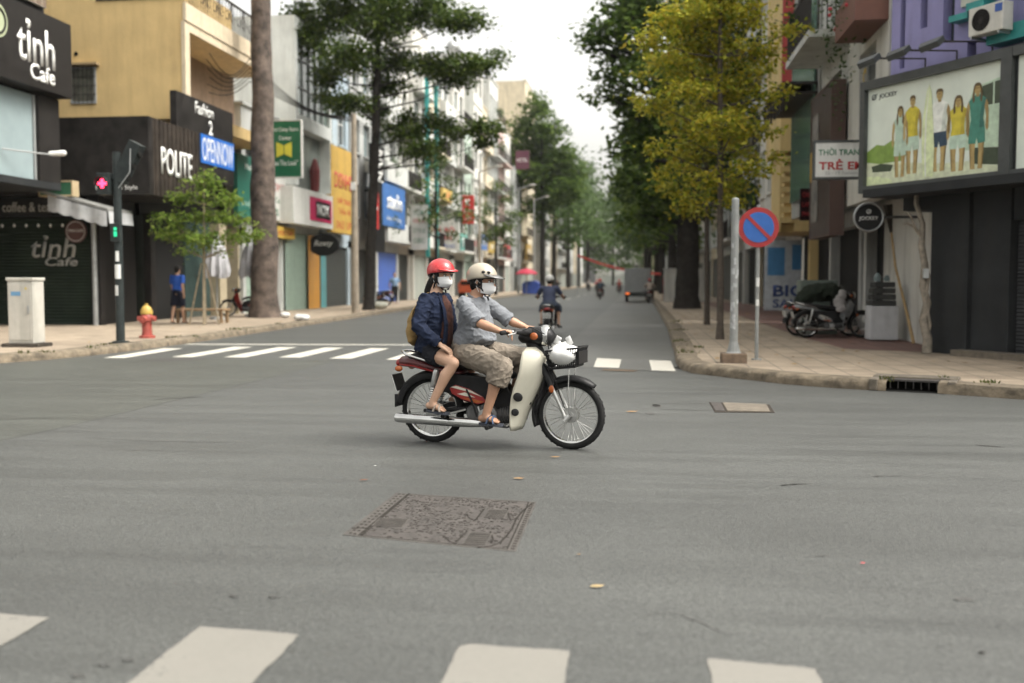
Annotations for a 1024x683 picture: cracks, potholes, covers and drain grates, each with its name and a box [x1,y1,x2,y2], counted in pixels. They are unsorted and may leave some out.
manhole cover [343,493,536,552]
manhole cover [709,402,775,413]
drain grate [869,373,961,394]
